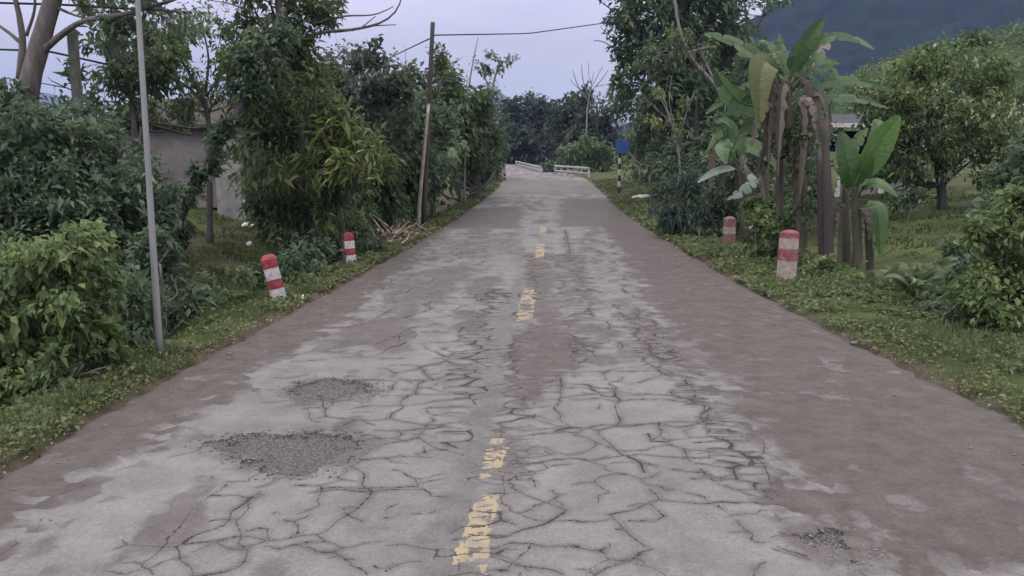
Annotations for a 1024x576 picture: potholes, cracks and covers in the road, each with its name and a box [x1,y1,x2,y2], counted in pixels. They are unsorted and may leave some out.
pothole [798,521,859,564]
crack [109,230,808,576]
pothole [279,377,379,400]
pothole [201,429,362,477]
